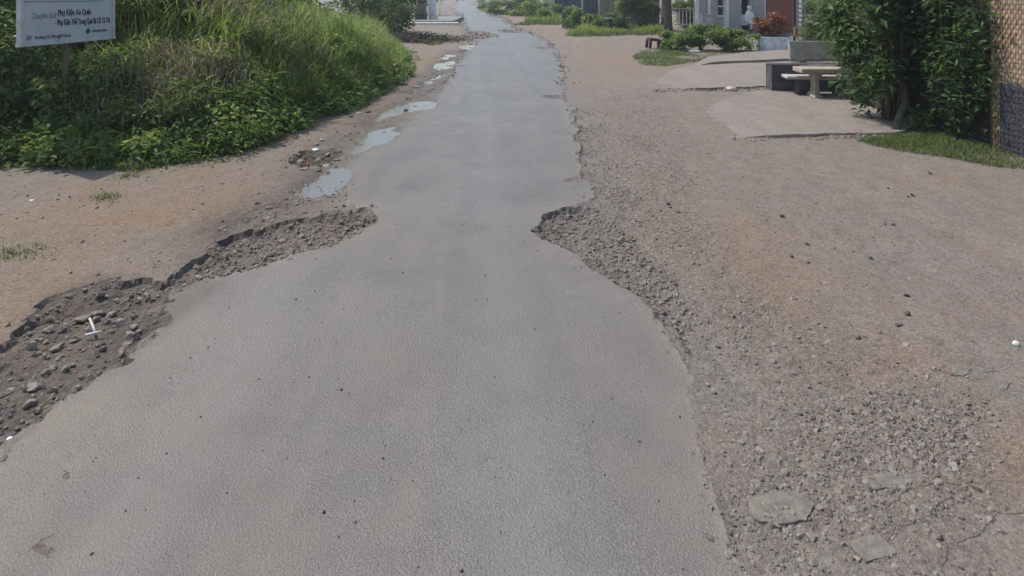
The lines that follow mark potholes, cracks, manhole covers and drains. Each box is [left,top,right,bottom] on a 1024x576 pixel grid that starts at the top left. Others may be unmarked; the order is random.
pothole [530,202,700,358]
pothole [0,276,176,446]
pothole [288,150,347,169]
pothole [167,207,379,289]
